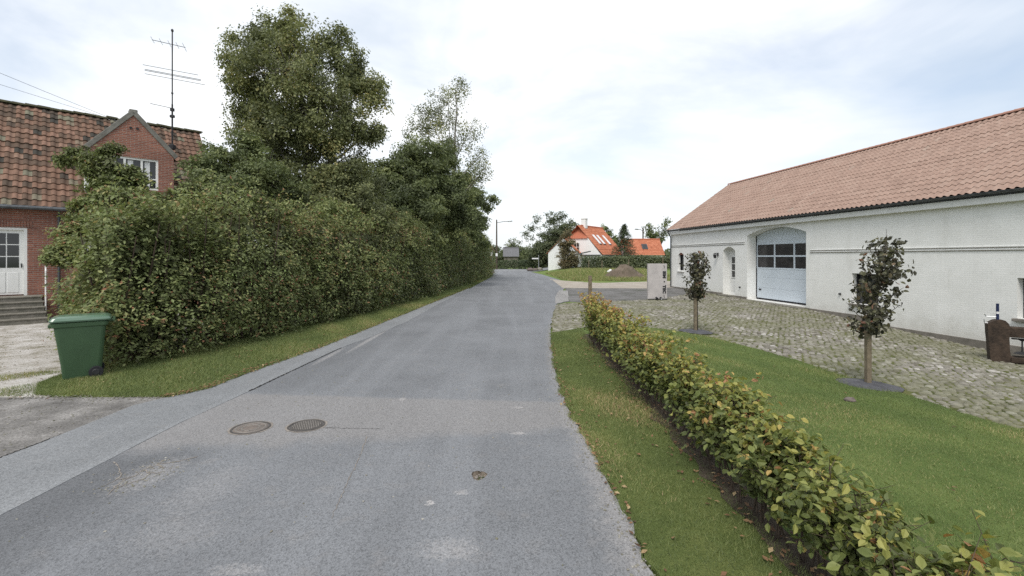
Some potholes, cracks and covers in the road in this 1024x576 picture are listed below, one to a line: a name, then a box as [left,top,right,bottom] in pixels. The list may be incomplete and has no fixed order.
crack [109,456,198,494]
manhole cover [227,421,273,435]
crack [329,427,379,517]
manhole cover [285,419,328,433]
pothole [471,471,487,481]
